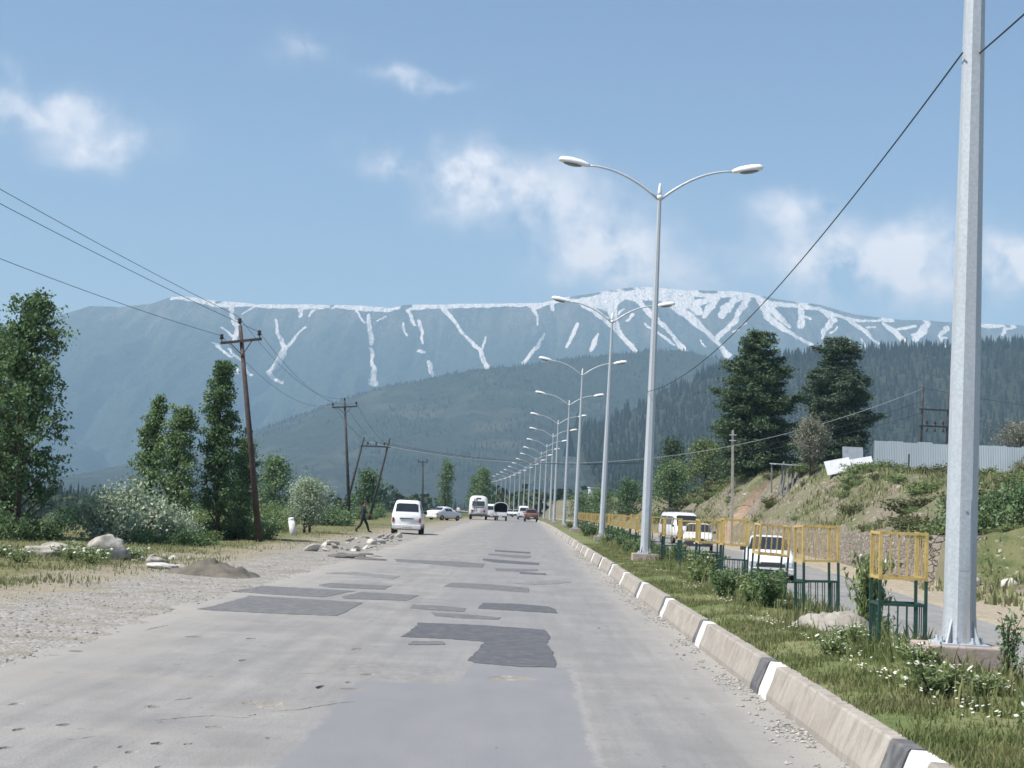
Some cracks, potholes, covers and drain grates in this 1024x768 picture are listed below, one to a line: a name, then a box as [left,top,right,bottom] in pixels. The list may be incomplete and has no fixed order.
crack [155,698,256,721]
